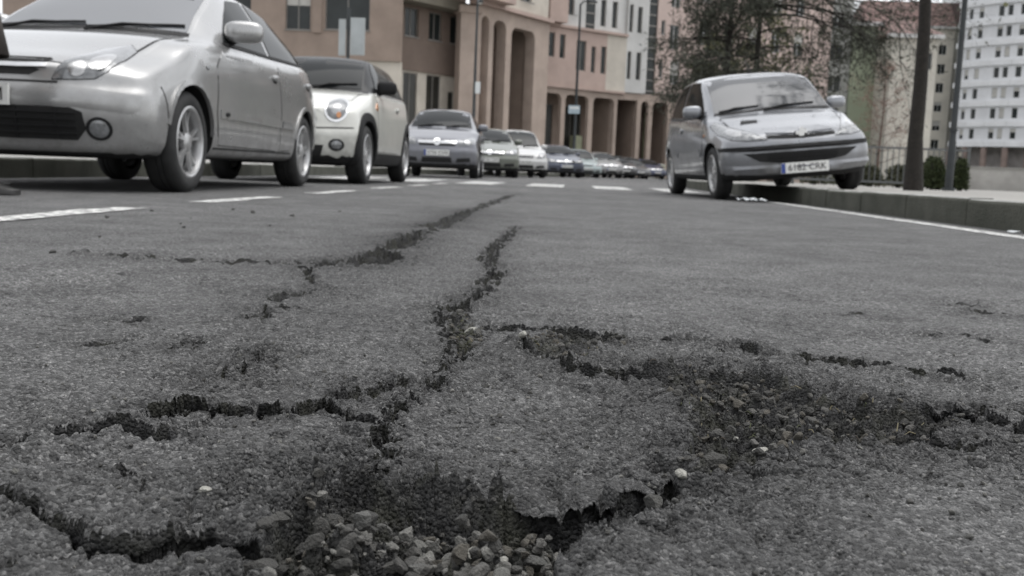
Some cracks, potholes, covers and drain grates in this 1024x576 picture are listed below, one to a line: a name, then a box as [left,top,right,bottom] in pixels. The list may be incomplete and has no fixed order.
crack [948,302,1022,318]
crack [926,403,1024,457]
crack [928,332,990,344]
pothole [260,456,680,576]
crack [0,462,260,570]
crack [0,193,966,476]
